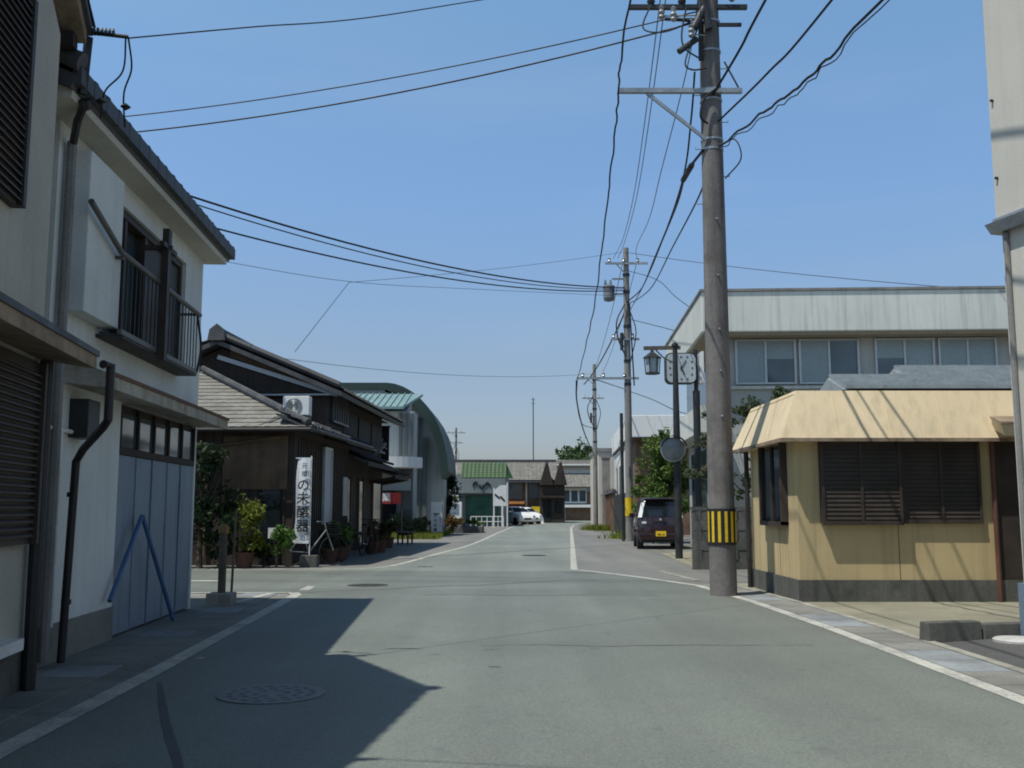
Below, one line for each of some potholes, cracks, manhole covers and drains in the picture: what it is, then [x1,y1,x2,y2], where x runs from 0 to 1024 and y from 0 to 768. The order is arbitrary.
manhole cover [216,684,325,705]
